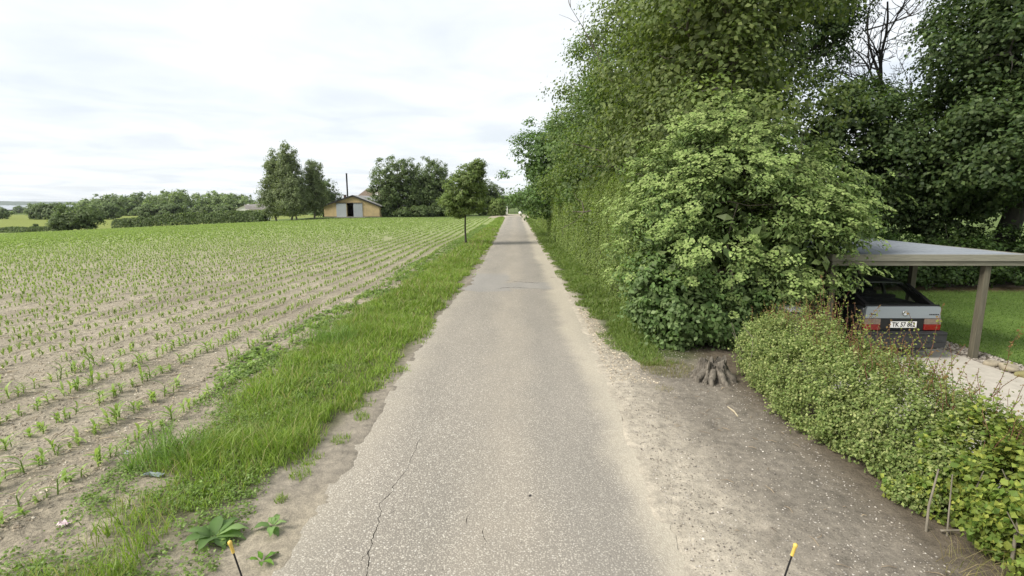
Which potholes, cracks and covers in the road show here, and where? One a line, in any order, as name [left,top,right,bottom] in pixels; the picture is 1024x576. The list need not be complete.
crack [361,441,419,576]
